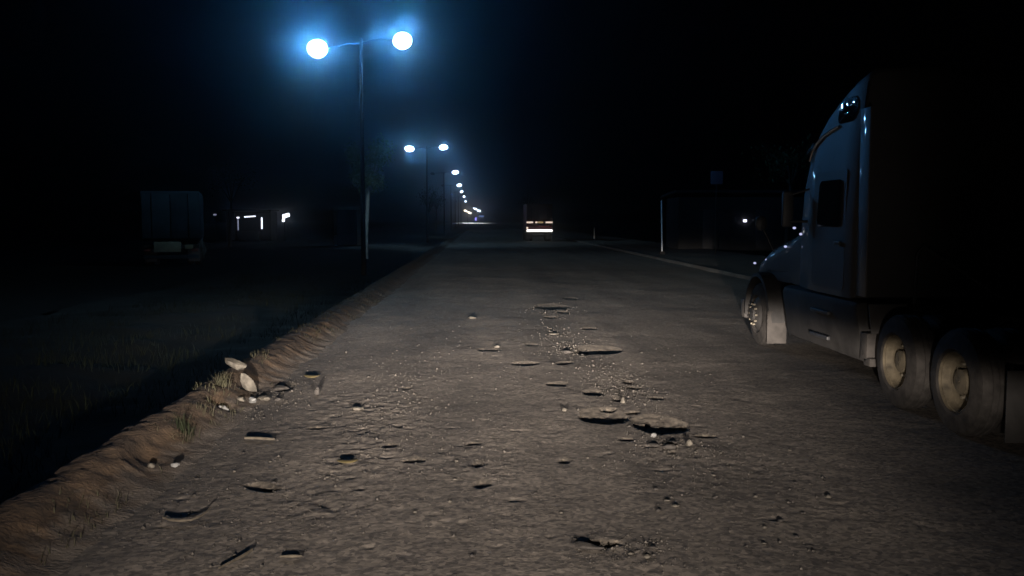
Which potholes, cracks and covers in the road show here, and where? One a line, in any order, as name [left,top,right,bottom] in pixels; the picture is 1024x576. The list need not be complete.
pothole [575,345,623,355]
pothole [588,539,623,549]
pothole [630,414,691,435]
pothole [579,406,630,425]
